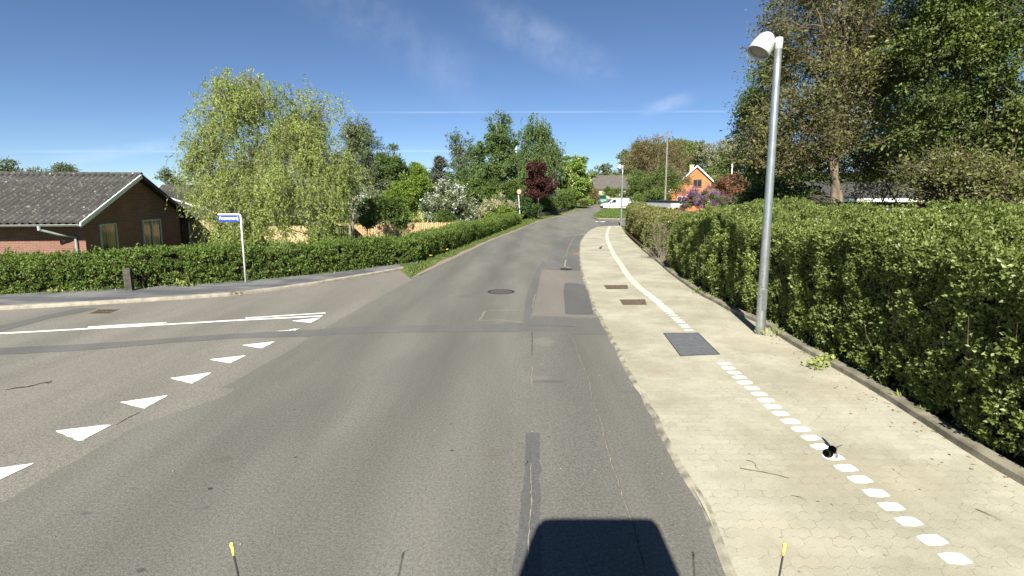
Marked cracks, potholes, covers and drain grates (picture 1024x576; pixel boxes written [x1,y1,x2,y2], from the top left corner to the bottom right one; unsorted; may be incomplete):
utility cover [663,333,720,356]
